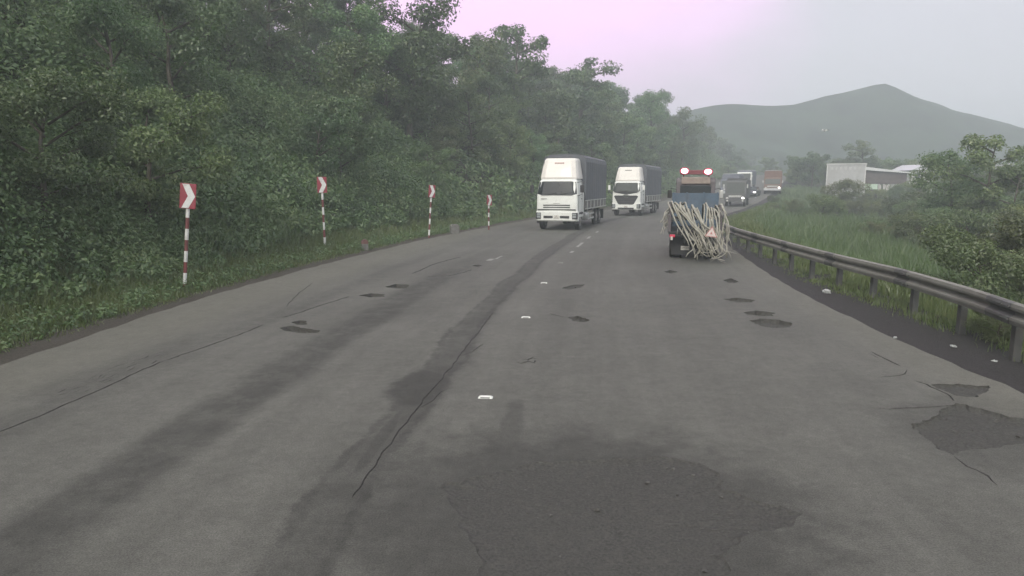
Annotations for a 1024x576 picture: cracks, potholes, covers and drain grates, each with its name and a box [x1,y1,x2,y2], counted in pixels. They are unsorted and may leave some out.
pothole [931,384,991,397]
crack [870,351,954,409]
crack [0,284,349,432]
crack [955,457,998,486]
pothole [911,403,1024,455]
pothole [750,319,792,328]
